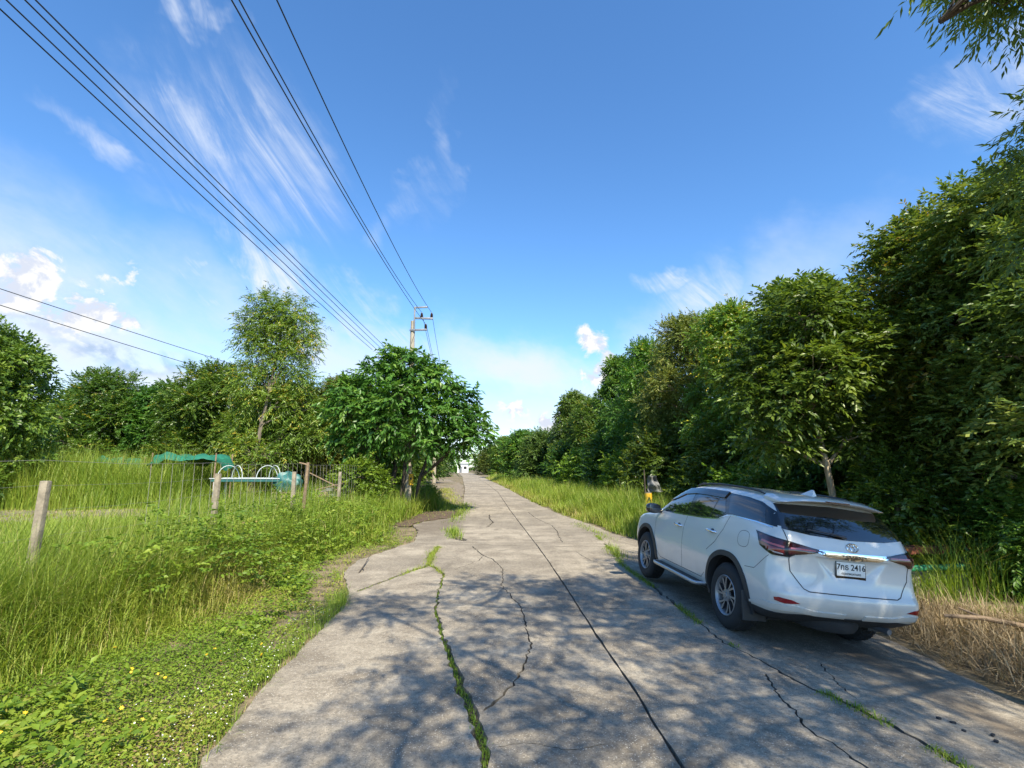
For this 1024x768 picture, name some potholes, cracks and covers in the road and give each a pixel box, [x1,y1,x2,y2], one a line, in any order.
crack [680,663,869,768]
crack [356,546,603,768]
